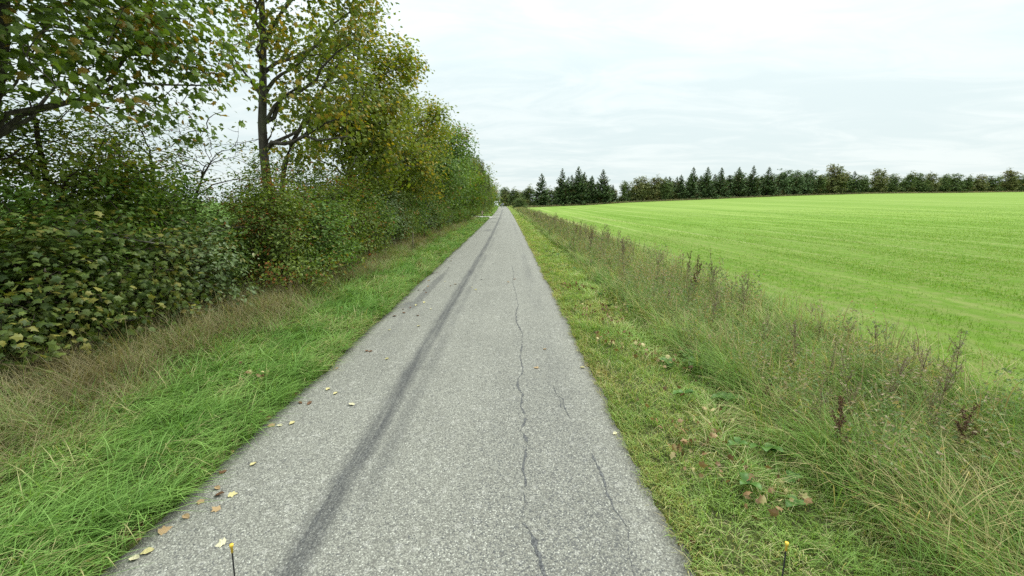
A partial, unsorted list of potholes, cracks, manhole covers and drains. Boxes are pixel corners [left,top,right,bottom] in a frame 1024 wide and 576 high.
crack [592,454,635,576]
crack [512,267,546,576]
